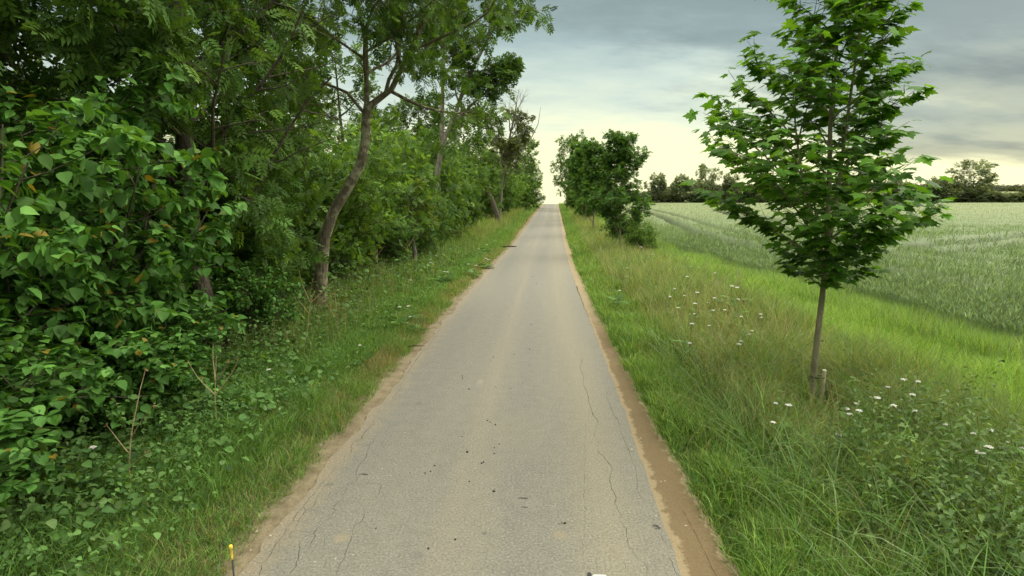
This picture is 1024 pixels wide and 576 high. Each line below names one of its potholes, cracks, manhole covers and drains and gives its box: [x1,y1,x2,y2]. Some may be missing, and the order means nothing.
crack [580,359,654,575]
crack [259,421,389,576]
